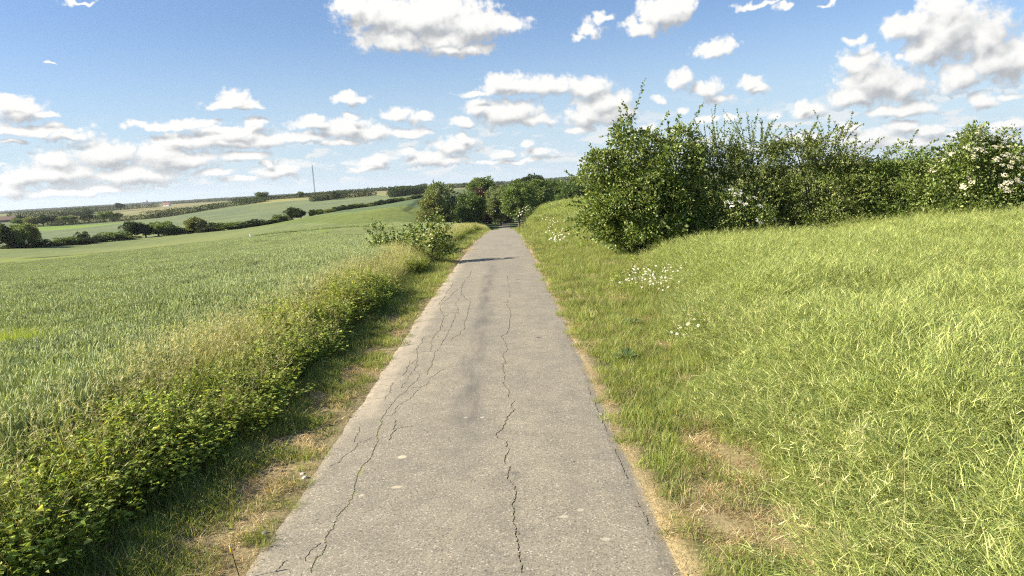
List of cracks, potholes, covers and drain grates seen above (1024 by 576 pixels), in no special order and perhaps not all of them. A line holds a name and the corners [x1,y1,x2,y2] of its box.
crack [305,272,471,573]
crack [495,276,524,574]
